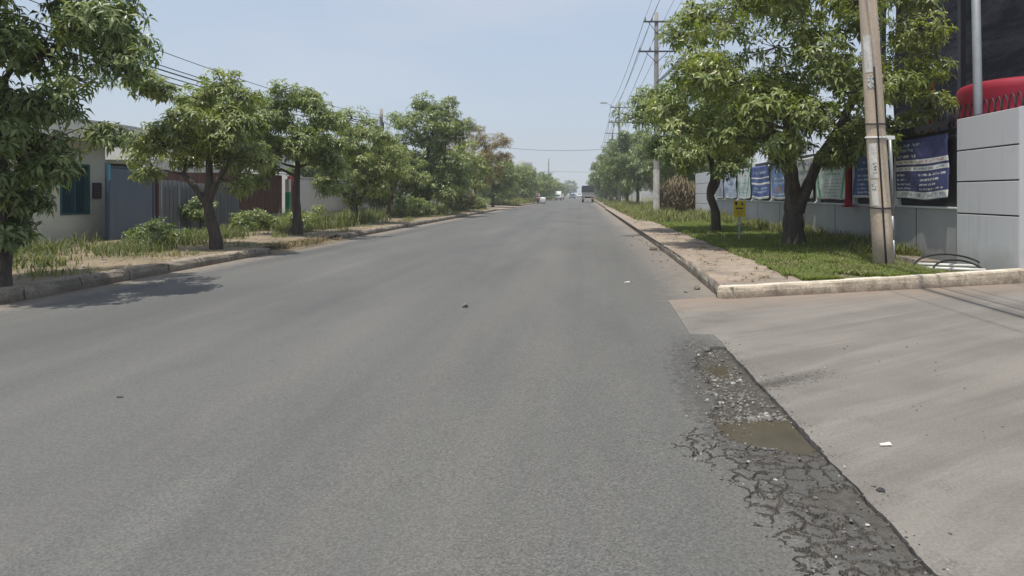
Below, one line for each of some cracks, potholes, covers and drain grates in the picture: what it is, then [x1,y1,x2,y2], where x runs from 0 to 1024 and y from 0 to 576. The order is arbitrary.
pothole [681,371,821,457]
crack [671,427,931,576]
pothole [681,344,755,391]
